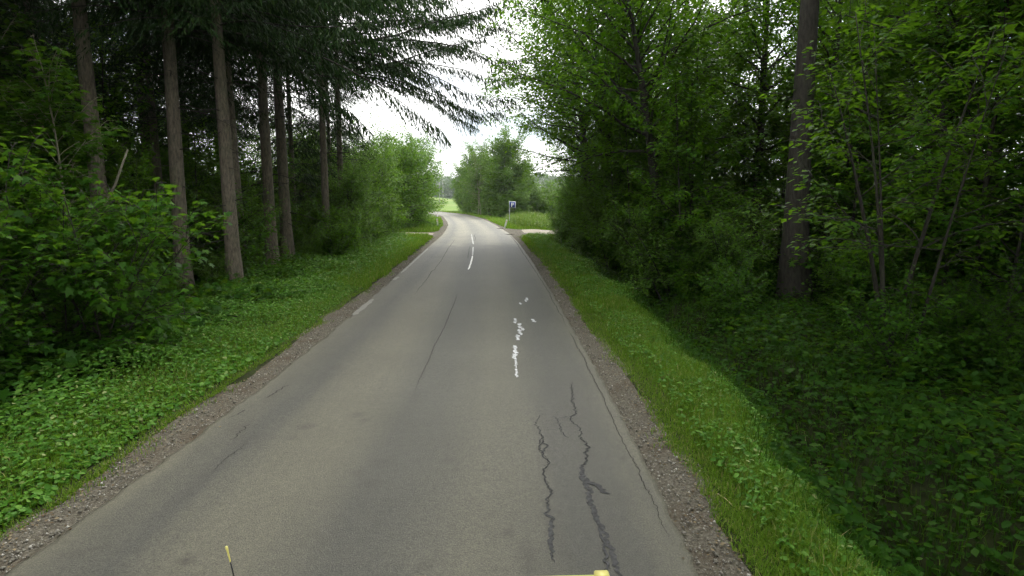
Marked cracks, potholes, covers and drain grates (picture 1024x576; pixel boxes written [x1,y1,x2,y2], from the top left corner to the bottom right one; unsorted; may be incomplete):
crack [534,335,673,576]
crack [415,299,456,391]
